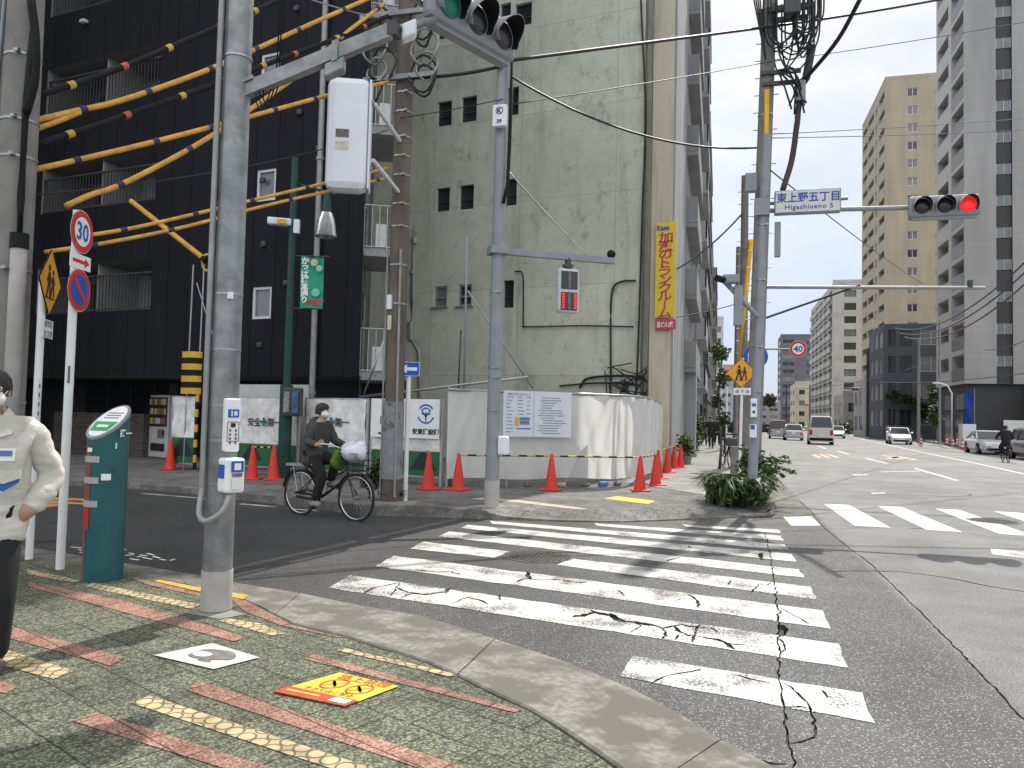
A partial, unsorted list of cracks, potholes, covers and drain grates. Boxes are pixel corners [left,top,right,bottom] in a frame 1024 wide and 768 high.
crack [573,590,738,649]
manhole cover [502,550,574,563]
crack [651,532,827,768]
crack [364,570,584,605]
crack [832,569,1024,592]
